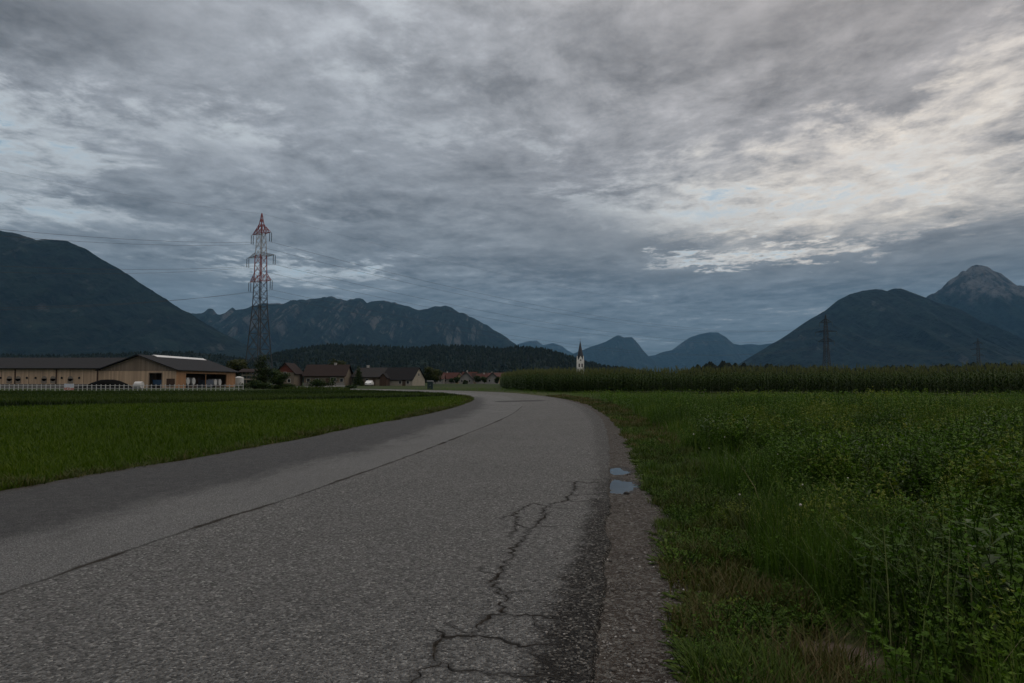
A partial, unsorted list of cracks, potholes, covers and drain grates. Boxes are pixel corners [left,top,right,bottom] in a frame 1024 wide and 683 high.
crack [410,481,597,683]
